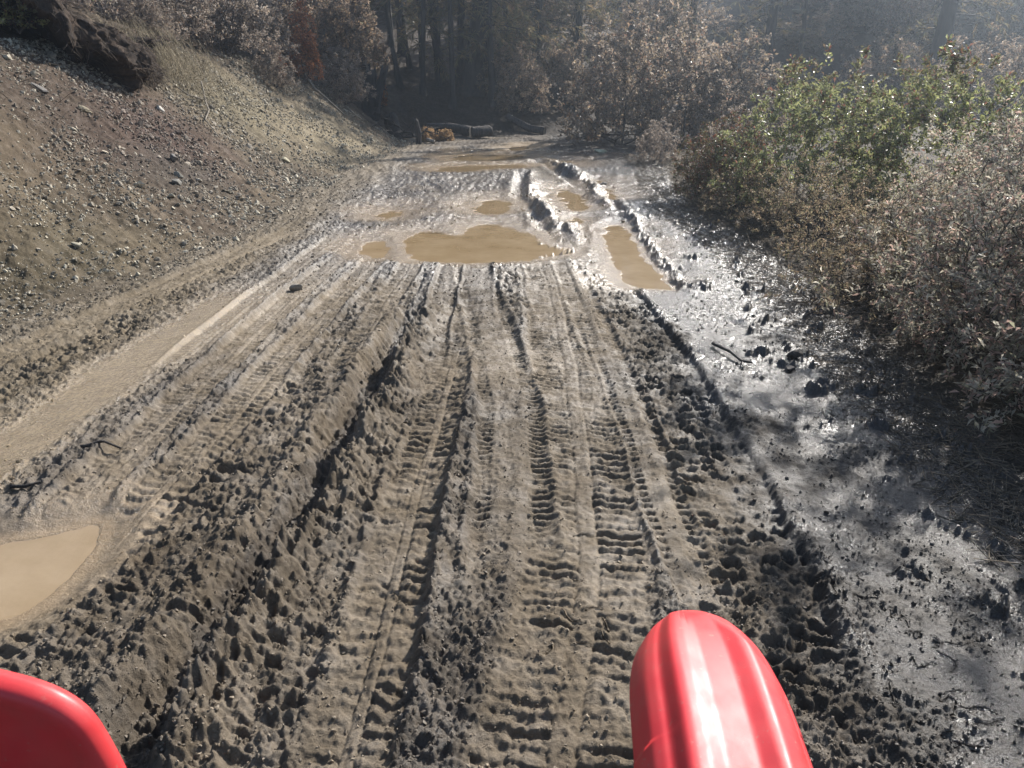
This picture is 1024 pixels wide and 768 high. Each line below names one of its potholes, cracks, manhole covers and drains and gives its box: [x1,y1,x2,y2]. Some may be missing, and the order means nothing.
pothole [351,239,398,259]
pothole [398,223,580,264]
pothole [468,198,518,215]
pothole [598,223,681,291]
pothole [548,188,597,212]
pothole [0,510,122,631]
